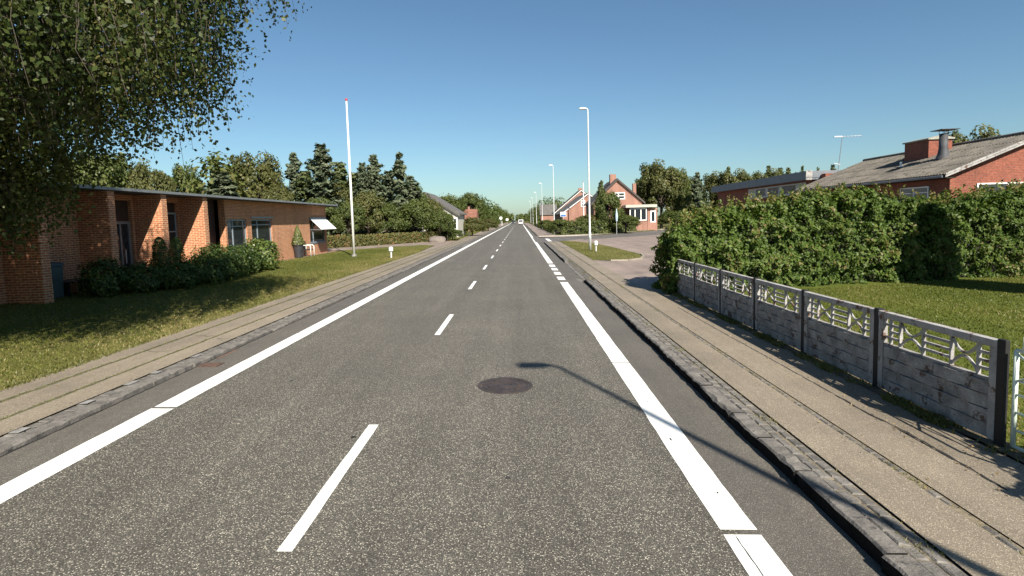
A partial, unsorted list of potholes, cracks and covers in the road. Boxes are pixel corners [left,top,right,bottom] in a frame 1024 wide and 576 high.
manhole cover [478,377,533,394]
